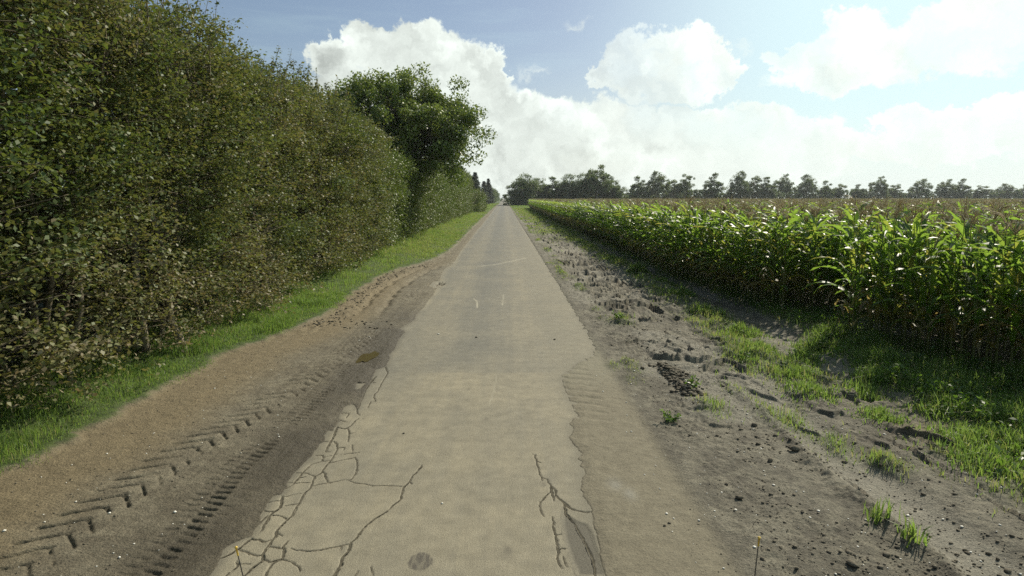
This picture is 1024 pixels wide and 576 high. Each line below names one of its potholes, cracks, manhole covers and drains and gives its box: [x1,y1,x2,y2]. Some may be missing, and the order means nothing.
crack [533,454,596,576]
crack [220,367,422,576]
